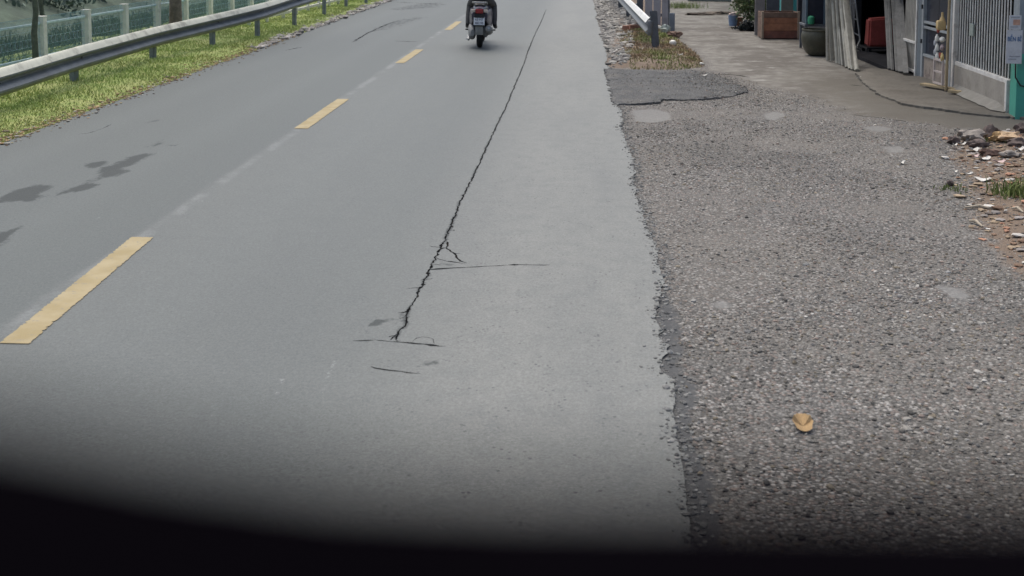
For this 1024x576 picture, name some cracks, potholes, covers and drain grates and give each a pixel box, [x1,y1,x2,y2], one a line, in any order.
crack [357,13,545,346]
